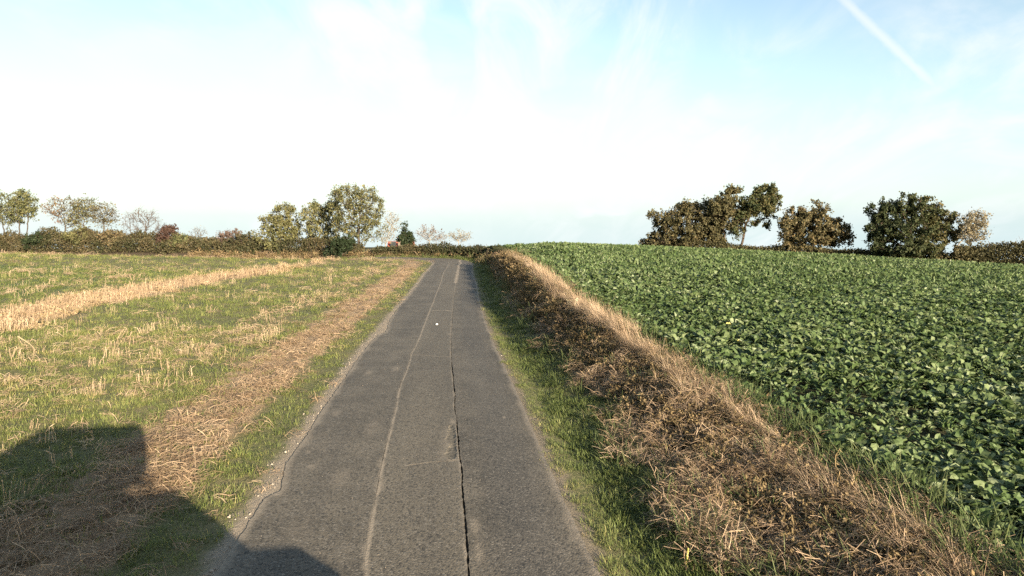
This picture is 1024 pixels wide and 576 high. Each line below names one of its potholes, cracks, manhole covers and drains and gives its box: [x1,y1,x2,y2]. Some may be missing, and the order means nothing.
crack [412,292,470,576]
